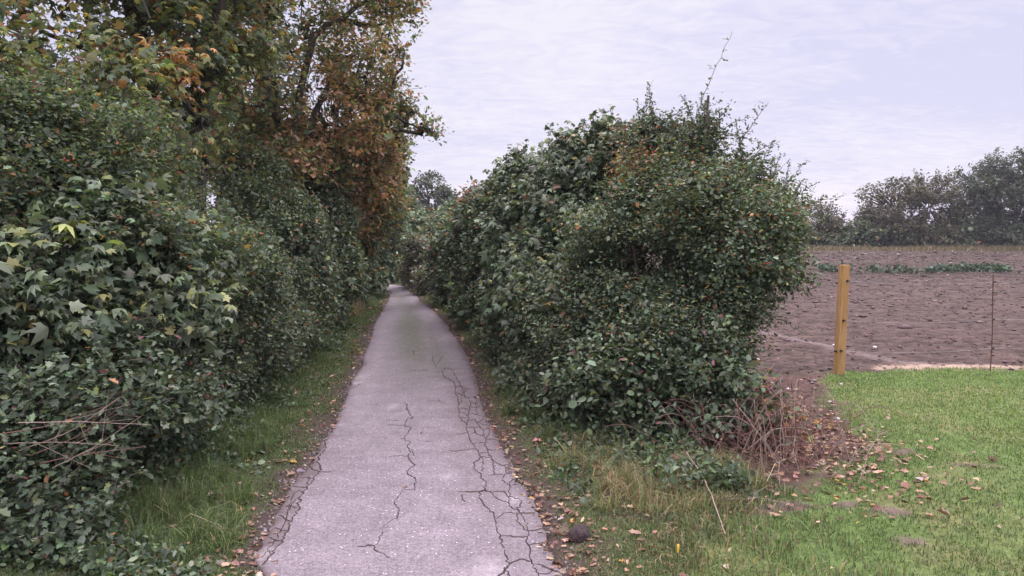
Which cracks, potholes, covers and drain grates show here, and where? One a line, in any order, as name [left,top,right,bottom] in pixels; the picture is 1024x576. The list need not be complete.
crack [442,368,559,576]
crack [261,438,329,566]
crack [351,403,417,558]
